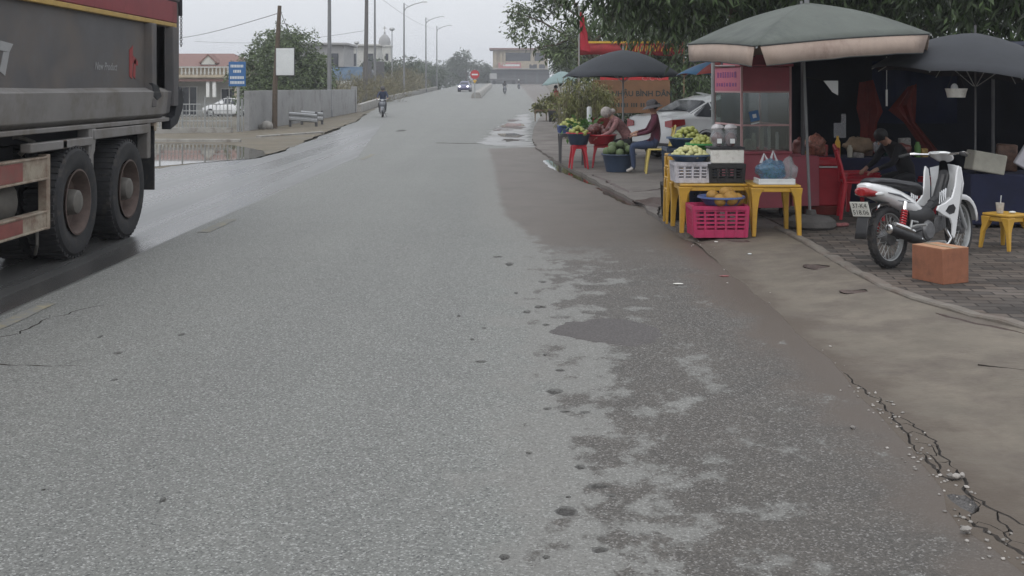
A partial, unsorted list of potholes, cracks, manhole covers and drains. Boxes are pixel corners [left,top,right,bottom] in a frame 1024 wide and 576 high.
pothole [554,506,578,516]
crack [1,305,101,337]
crack [843,372,1024,556]
